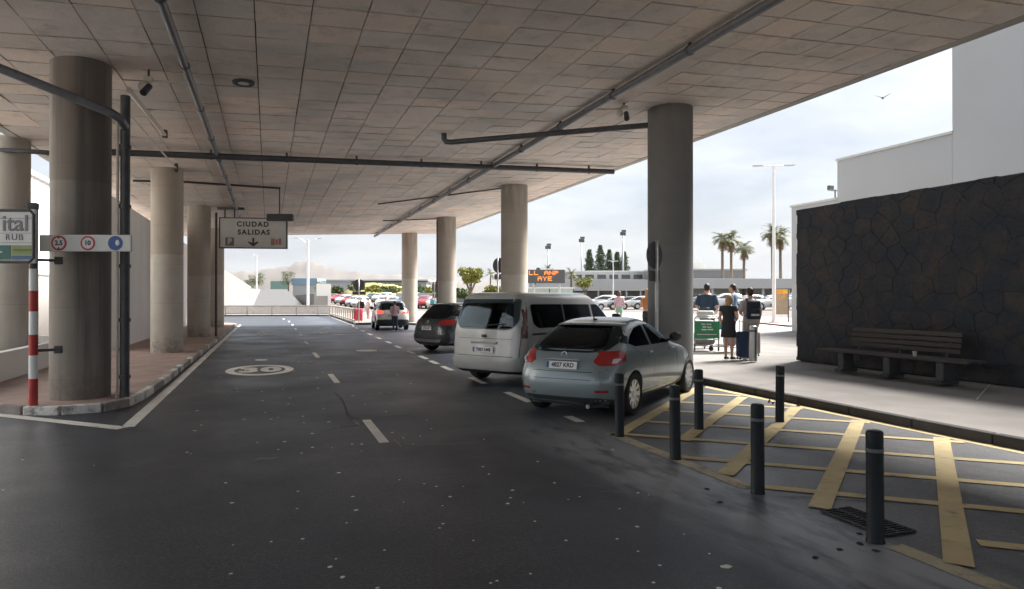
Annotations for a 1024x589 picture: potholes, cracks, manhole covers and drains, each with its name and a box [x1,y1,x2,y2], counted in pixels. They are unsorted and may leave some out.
drain grate [820,506,917,537]
crack [325,392,408,428]
